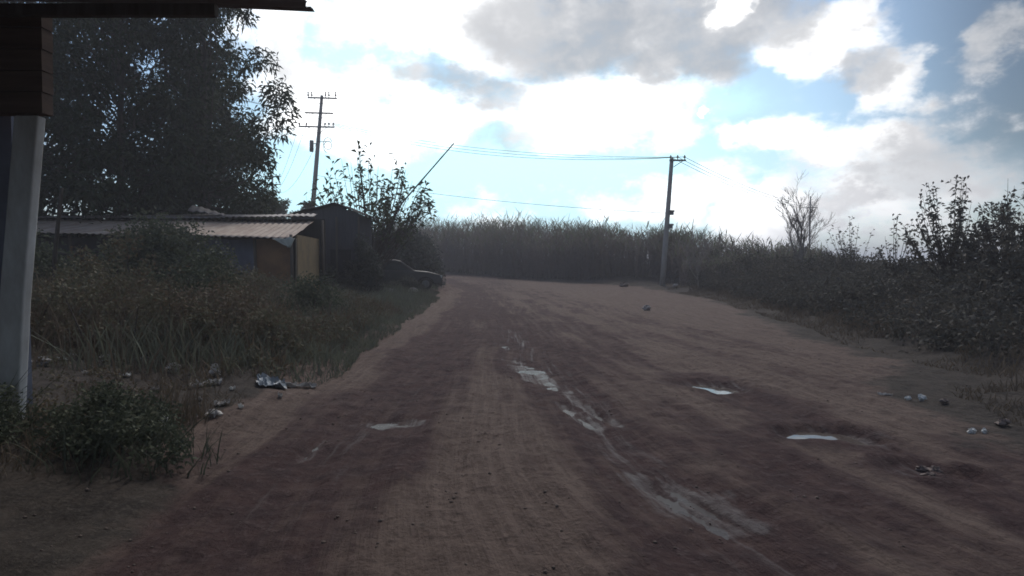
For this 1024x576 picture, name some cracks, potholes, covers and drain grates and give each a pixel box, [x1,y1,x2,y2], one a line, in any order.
pothole [764,420,895,446]
pothole [660,377,755,394]
